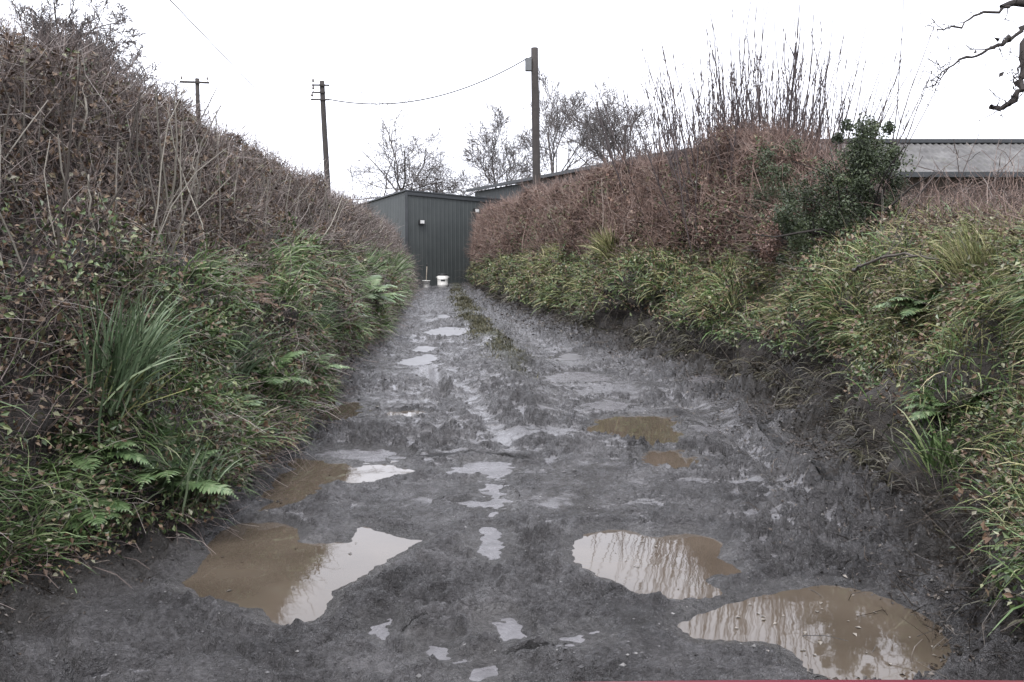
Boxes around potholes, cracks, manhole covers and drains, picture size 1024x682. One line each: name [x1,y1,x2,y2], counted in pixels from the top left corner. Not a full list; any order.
pothole [578,411,699,446]
pothole [243,450,427,513]
pothole [165,511,437,627]
pothole [620,441,715,470]
pothole [559,520,755,603]
pothole [662,574,975,680]
